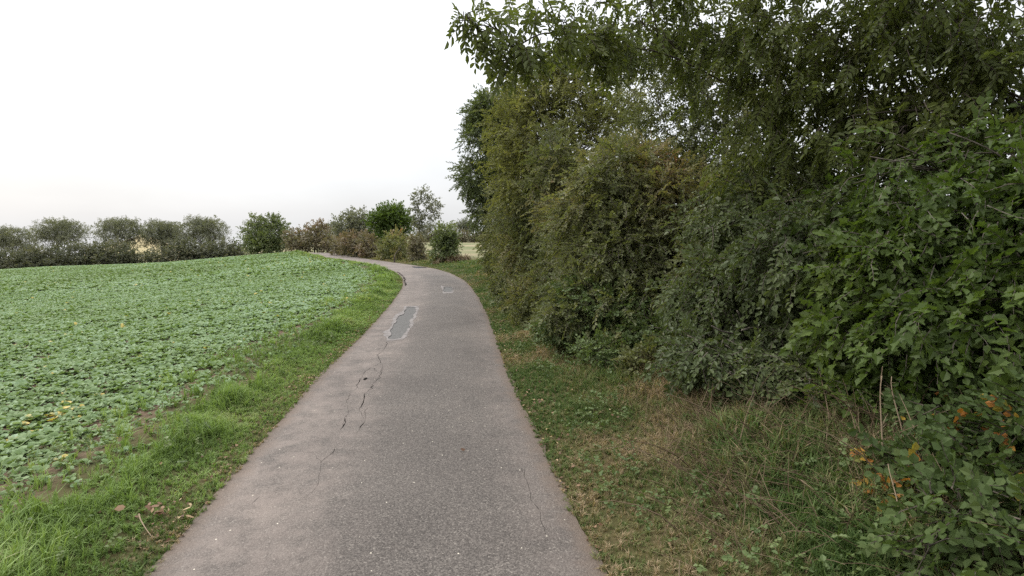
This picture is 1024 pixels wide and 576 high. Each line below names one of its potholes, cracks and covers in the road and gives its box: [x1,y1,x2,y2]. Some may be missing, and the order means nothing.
crack [311,342,388,492]
